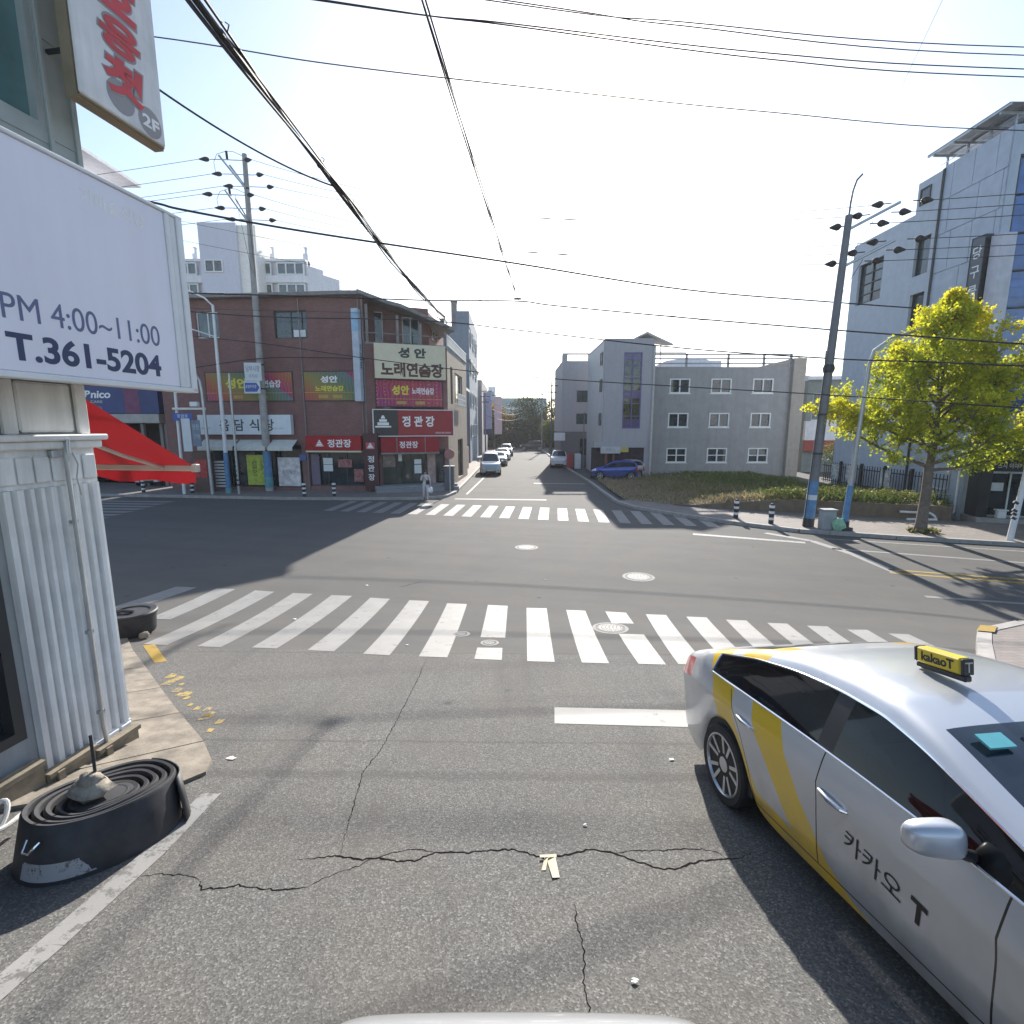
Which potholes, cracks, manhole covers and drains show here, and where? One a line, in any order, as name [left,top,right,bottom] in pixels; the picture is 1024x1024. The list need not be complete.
crack [574,906,591,1012]
manhole cover [592,622,629,634]
crack [144,848,756,891]
manhole cover [622,572,655,582]
crack [341,659,427,853]
